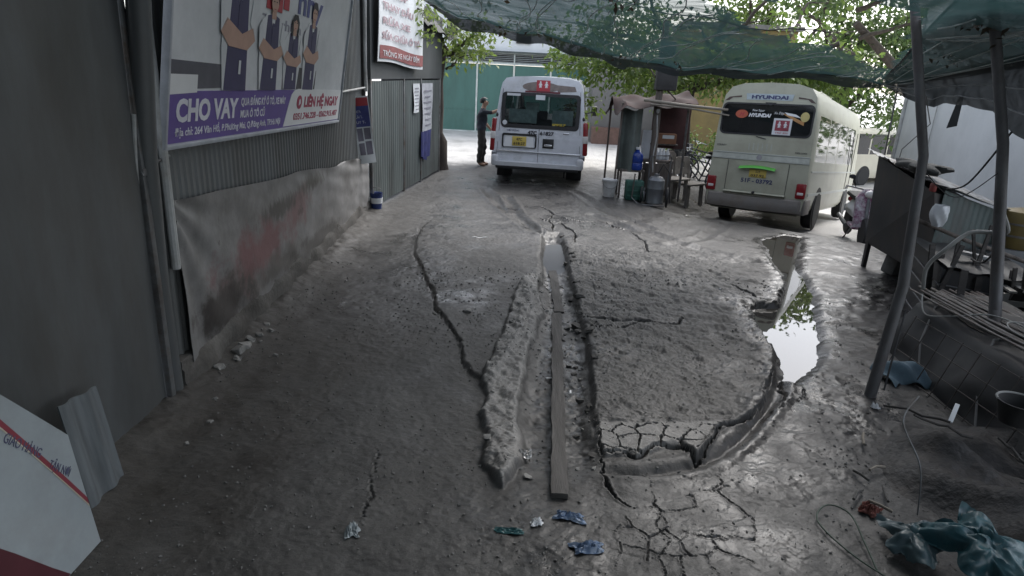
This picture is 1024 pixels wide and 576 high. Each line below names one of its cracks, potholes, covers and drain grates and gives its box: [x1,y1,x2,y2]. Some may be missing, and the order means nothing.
crack [598,380,787,576]
pothole [733,233,839,390]
pothole [538,240,572,271]
